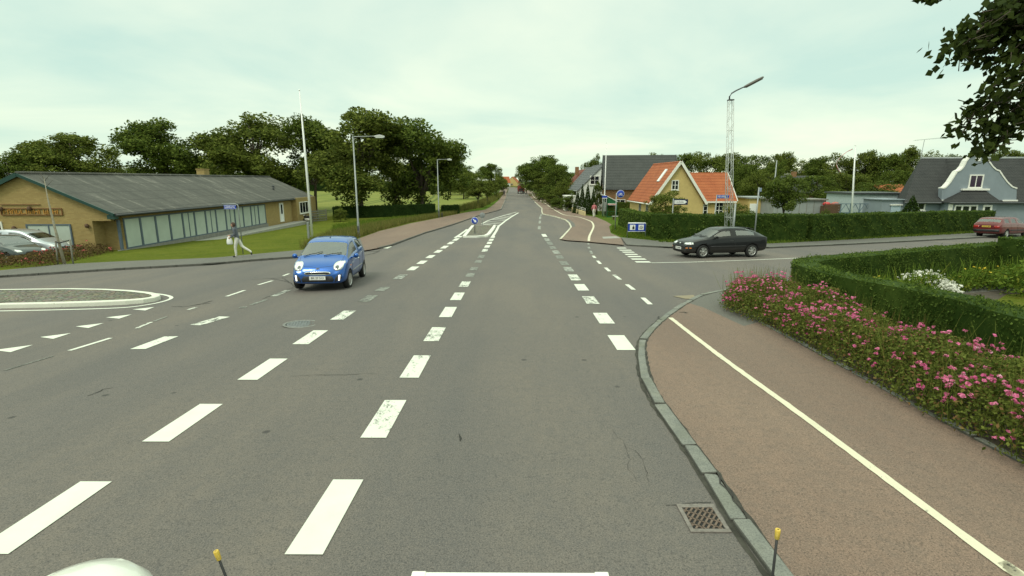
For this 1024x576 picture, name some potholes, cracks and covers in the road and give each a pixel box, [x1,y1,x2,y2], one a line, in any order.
manhole cover [282,320,315,328]
drain grate [676,504,732,533]
